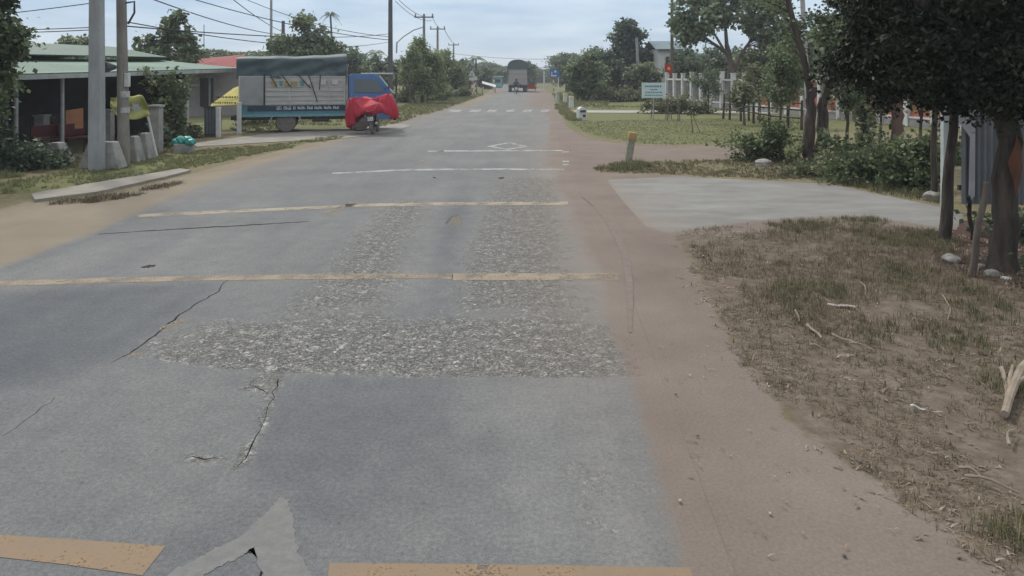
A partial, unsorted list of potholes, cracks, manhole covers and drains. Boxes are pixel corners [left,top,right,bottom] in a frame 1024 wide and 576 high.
crack [103,221,310,234]
pothole [446,215,462,226]
crack [191,378,279,467]
crack [2,281,226,437]
